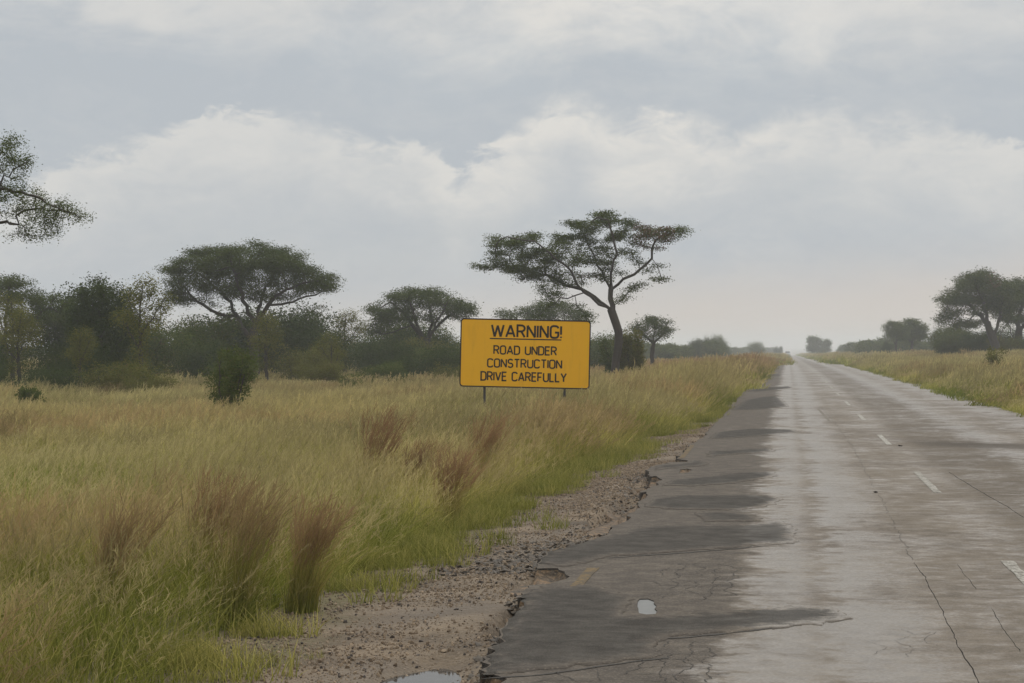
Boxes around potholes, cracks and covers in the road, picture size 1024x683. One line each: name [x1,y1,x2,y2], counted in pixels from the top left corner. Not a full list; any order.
crack [610,546,759,600]
crack [482,628,771,683]
pothole [510,569,568,596]
pothole [637,600,657,614]
crack [865,566,979,683]
